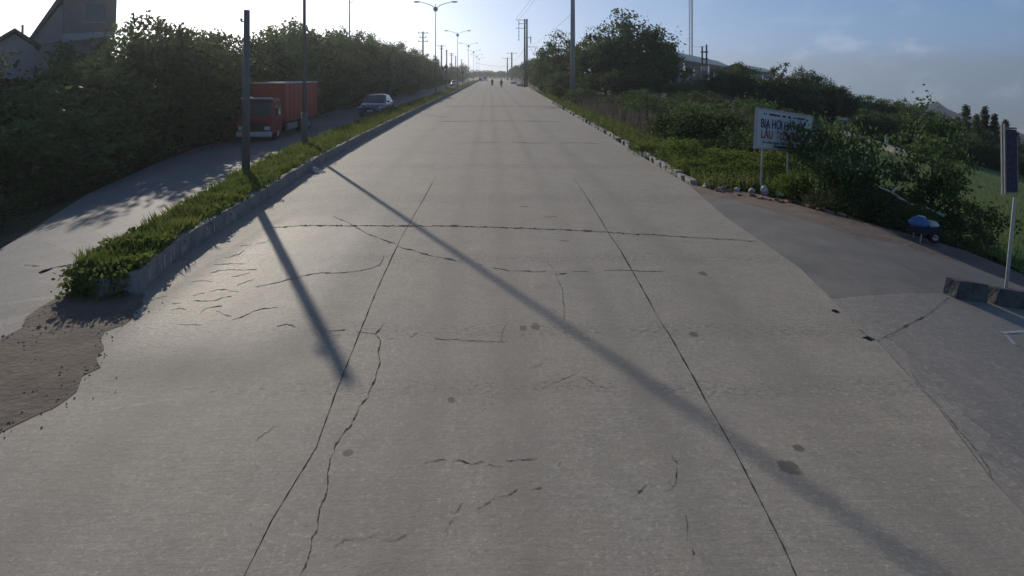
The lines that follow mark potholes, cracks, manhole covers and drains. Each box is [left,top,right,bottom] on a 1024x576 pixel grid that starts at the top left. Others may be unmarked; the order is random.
crack [299,324,507,575]
crack [851,298,992,477]
crack [160,217,750,336]
